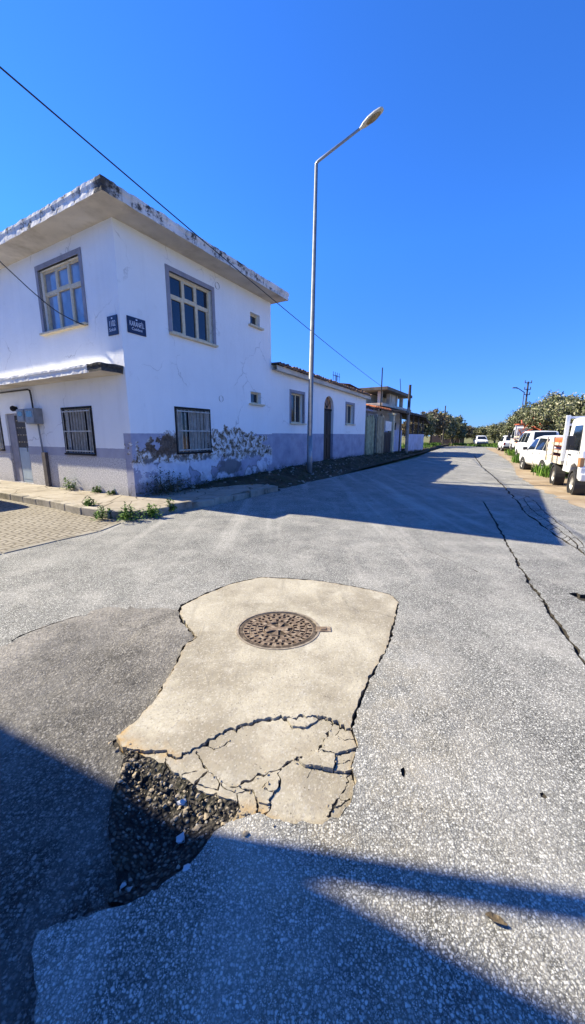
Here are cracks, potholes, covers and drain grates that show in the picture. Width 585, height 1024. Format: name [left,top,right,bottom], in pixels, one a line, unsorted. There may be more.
pothole [107,750,240,907]
crack [11,613,92,641]
crack [411,457,585,665]
manhole cover [236,611,331,650]
crack [138,719,359,818]
